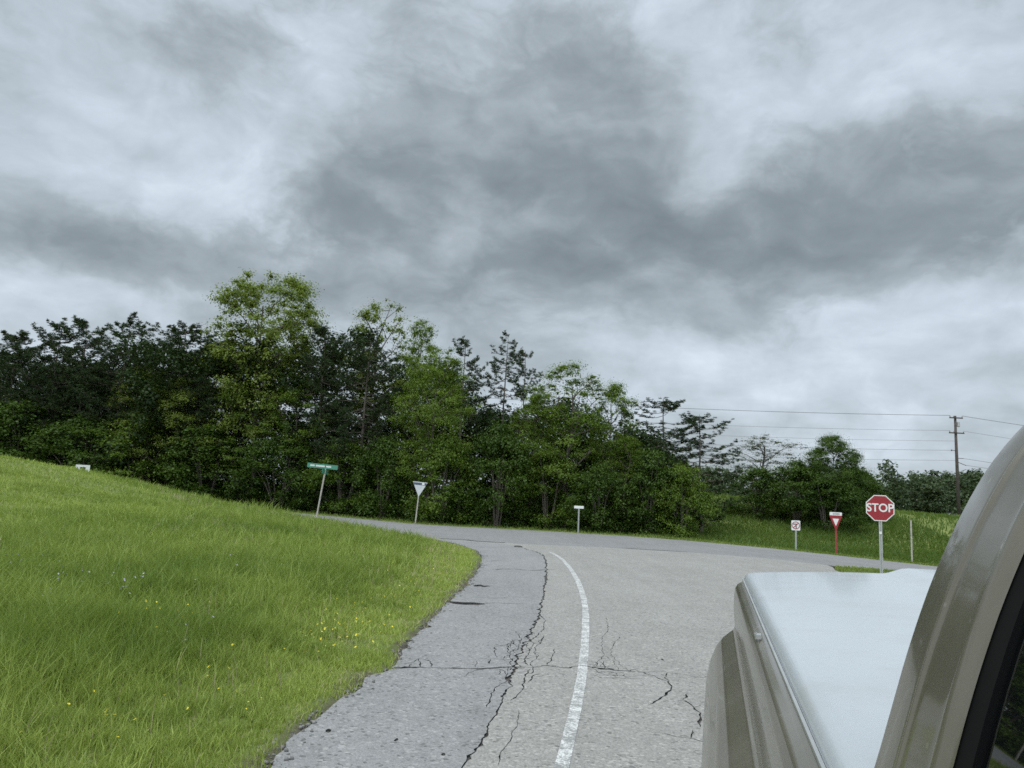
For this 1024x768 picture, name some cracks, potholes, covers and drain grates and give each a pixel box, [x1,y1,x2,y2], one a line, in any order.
crack [393,548,702,768]
